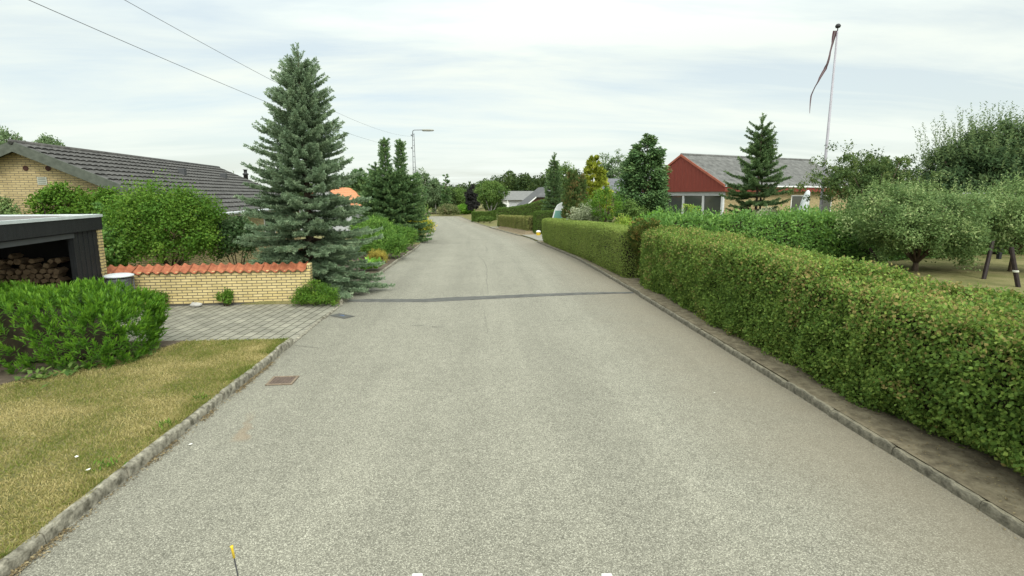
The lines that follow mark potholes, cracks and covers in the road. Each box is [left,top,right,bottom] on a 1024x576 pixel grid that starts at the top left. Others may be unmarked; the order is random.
drain grate [265,375,299,386]
